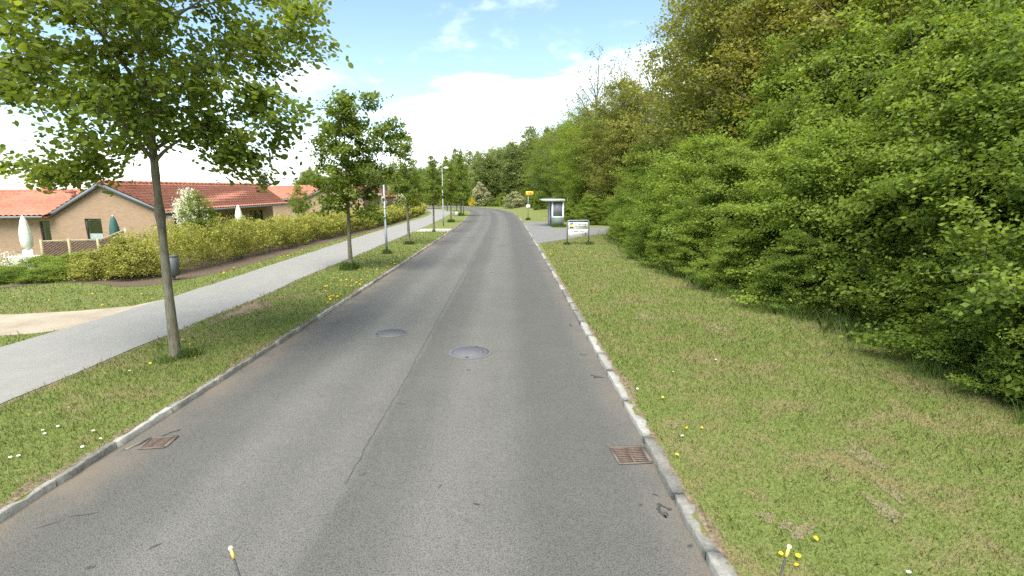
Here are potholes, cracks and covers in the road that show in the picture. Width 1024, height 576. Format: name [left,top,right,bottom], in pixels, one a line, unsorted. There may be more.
manhole cover [448,346,492,359]
drain grate [609,445,653,465]
drain grate [138,435,179,450]
manhole cover [375,329,407,337]
